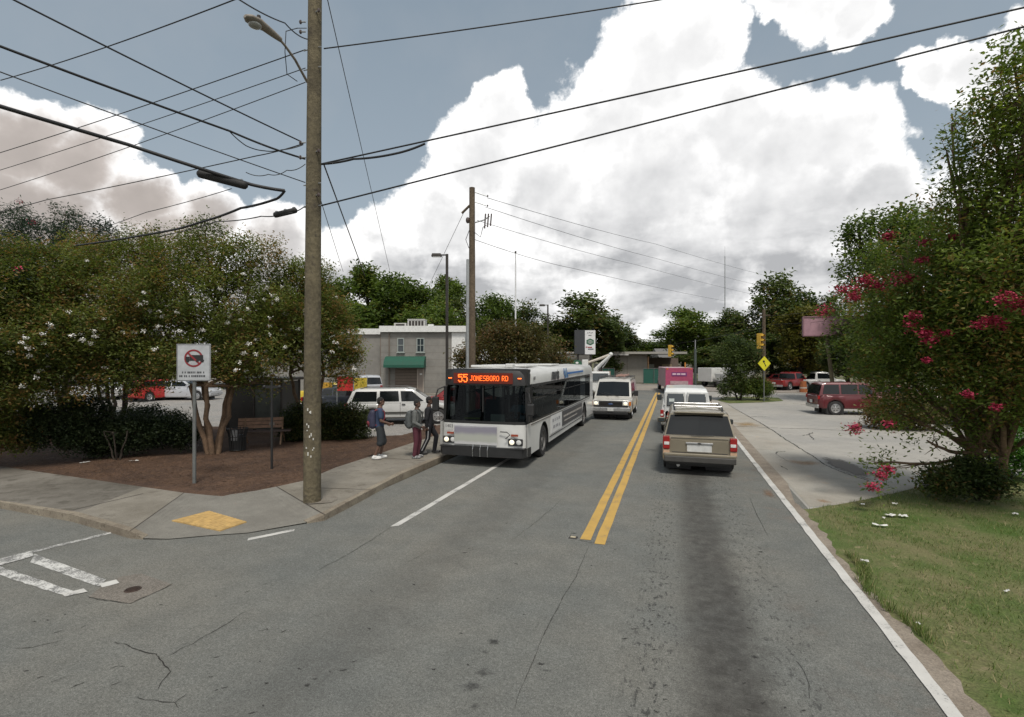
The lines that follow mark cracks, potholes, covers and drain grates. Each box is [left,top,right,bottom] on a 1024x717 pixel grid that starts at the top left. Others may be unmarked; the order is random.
crack [112,609,253,708]
